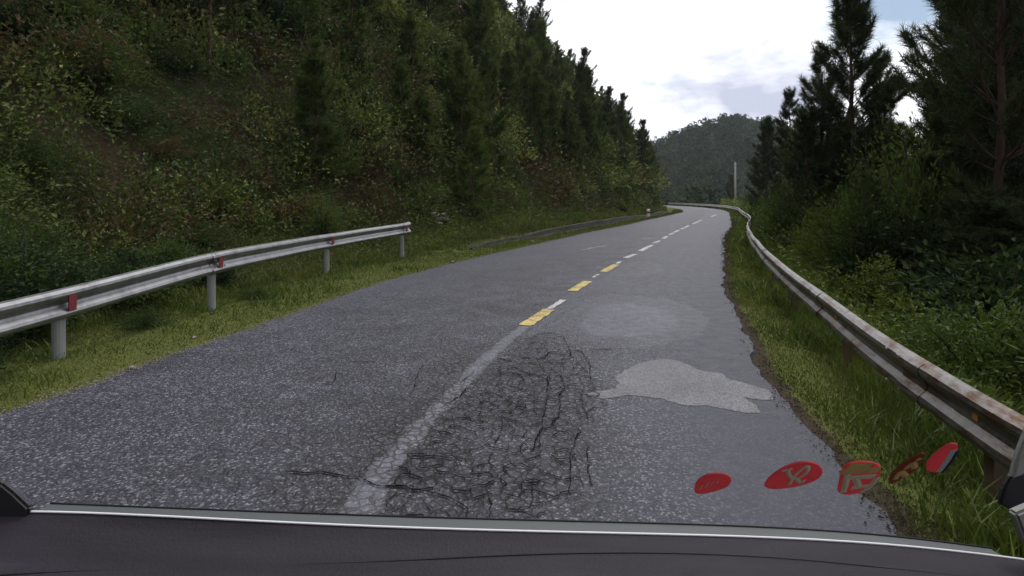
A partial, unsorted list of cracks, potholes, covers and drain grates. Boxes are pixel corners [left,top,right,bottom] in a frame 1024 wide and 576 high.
crack [285,333,607,519]
